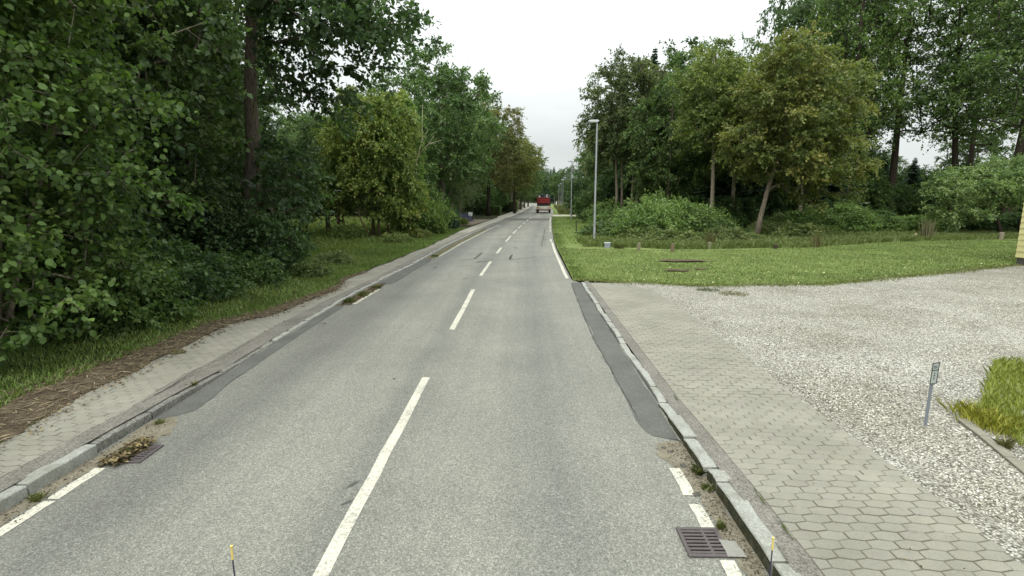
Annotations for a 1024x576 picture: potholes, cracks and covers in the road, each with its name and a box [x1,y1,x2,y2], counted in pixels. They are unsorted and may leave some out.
drain grate [676,527,733,558]
drain grate [114,444,164,463]
